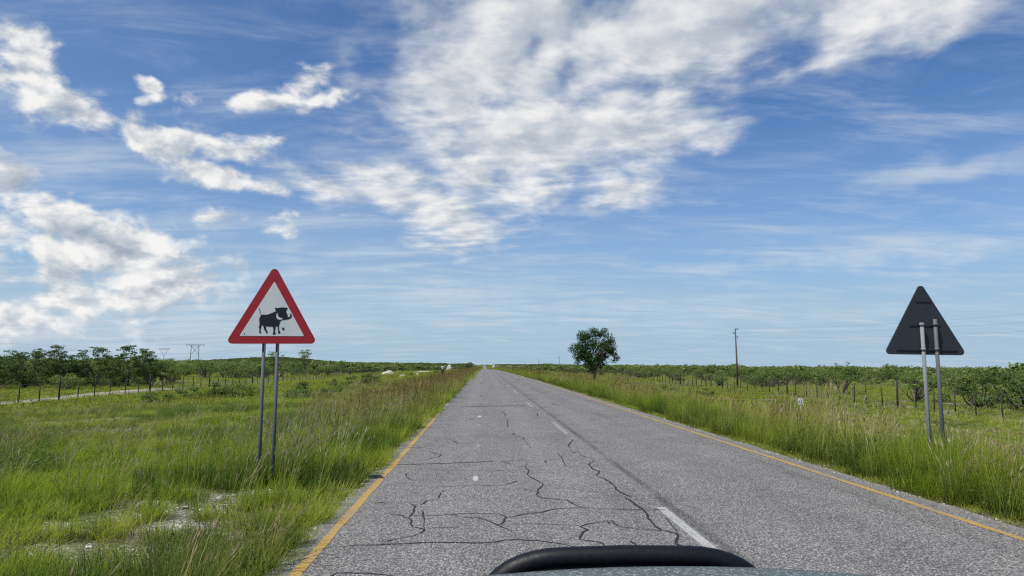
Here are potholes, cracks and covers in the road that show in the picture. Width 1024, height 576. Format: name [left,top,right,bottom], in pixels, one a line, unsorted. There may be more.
crack [337,411,680,547]
